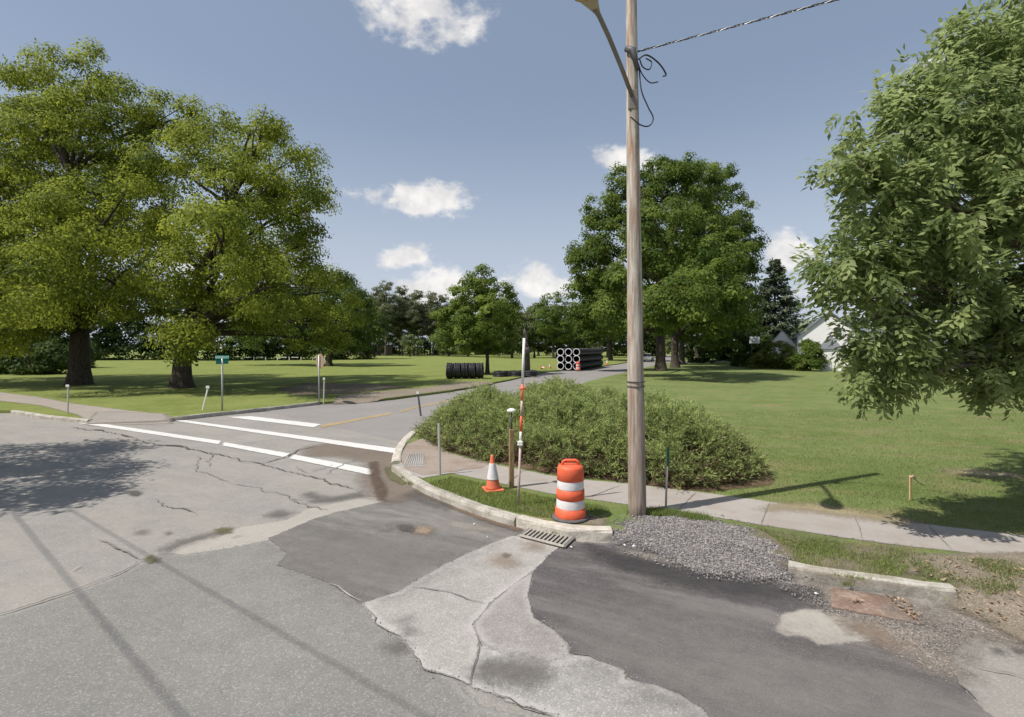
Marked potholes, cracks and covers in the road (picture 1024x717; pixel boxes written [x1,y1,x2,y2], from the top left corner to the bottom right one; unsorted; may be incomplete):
drain grate [519,528,575,548]
crack [77,427,351,510]
crack [331,583,559,714]
